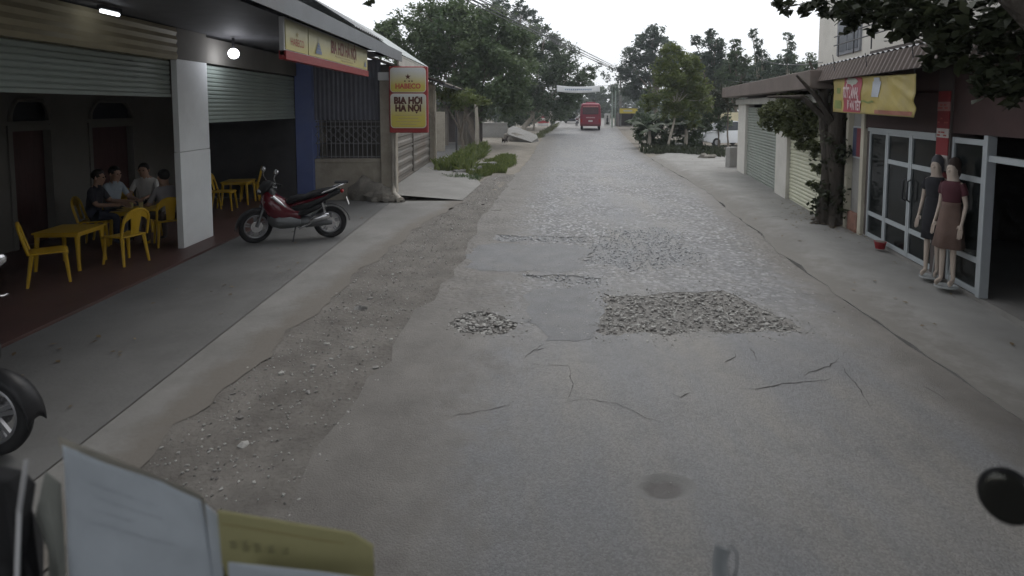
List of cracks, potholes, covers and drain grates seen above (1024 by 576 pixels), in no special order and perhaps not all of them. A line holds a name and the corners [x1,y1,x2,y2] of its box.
pothole [447,310,518,335]
crack [525,345,660,422]
pothole [596,290,802,336]
crack [758,358,869,404]
